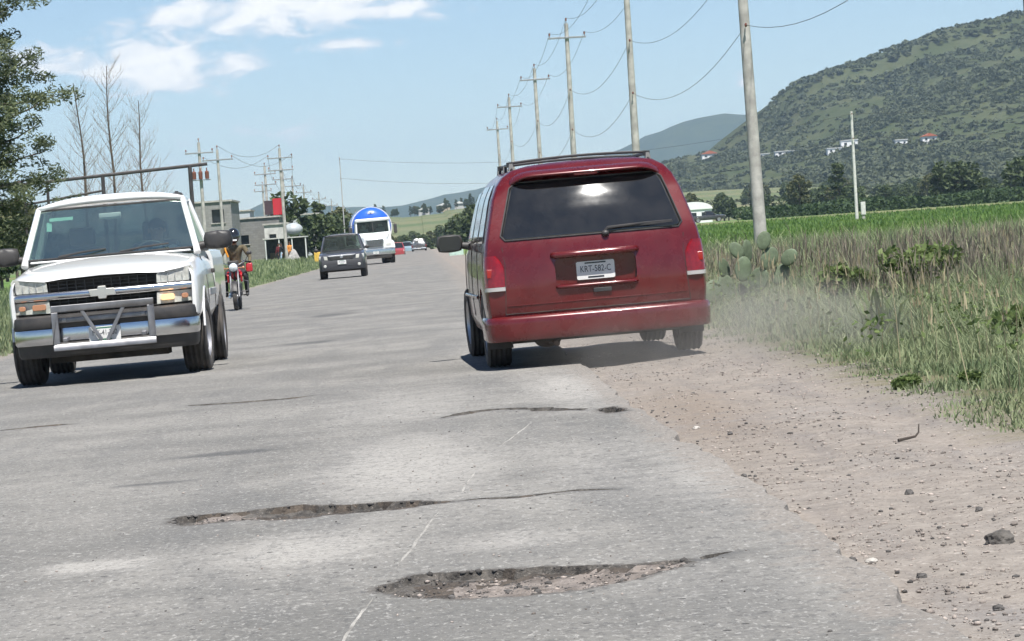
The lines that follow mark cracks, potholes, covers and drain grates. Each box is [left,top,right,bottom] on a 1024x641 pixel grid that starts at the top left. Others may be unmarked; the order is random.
crack [342,407,611,641]
pothole [168,500,451,526]
crack [188,395,315,406]
pothole [373,557,695,599]
